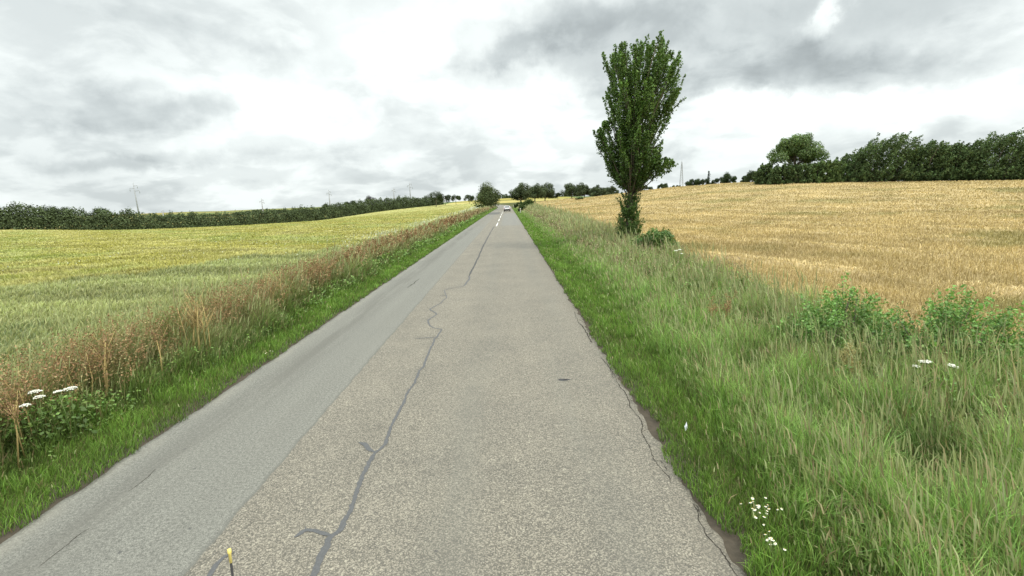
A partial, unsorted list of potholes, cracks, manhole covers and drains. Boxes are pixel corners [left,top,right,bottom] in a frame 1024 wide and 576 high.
crack [694,504,737,575]
crack [575,314,671,482]
